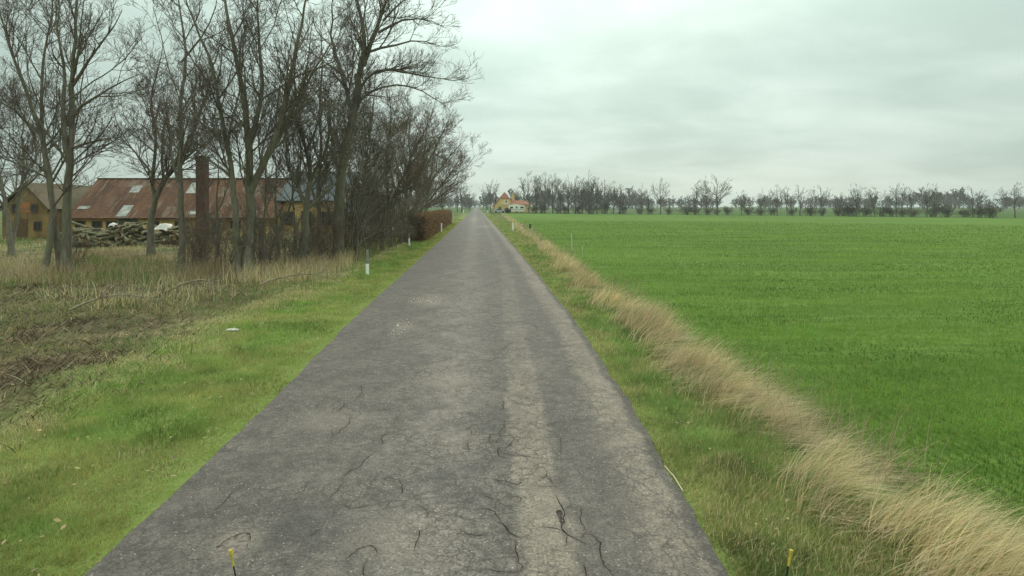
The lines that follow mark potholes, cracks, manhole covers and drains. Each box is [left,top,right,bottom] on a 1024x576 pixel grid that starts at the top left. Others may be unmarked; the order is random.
crack [465,387,613,575]
crack [331,385,428,546]
